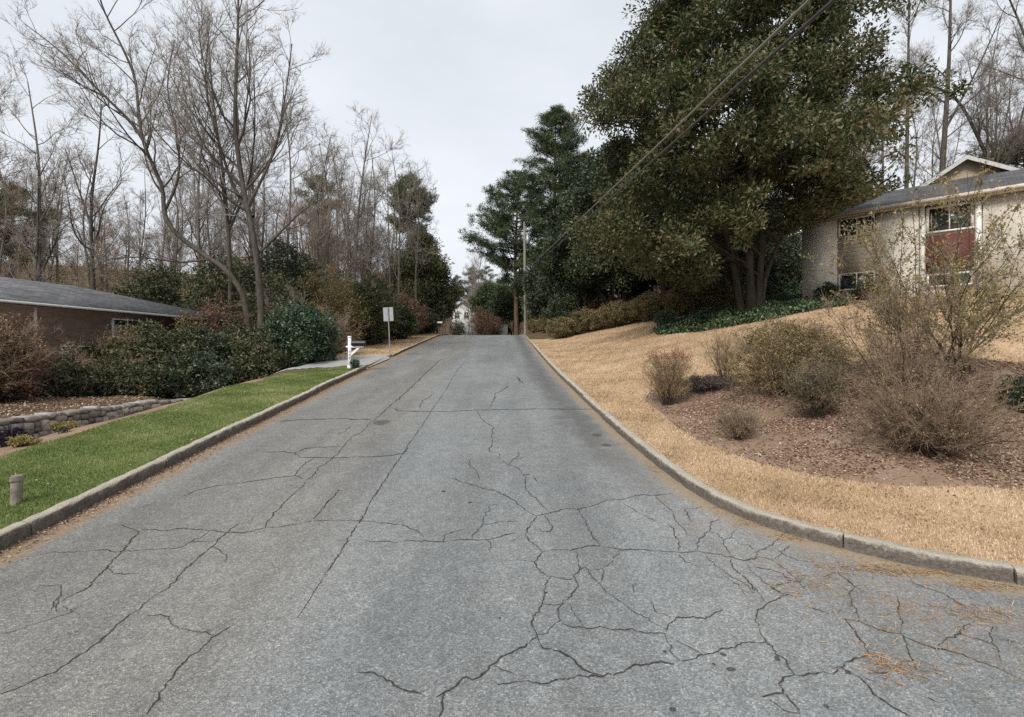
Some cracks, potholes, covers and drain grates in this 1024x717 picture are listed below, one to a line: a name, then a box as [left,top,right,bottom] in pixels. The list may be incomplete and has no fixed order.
crack [0,363,1019,717]
